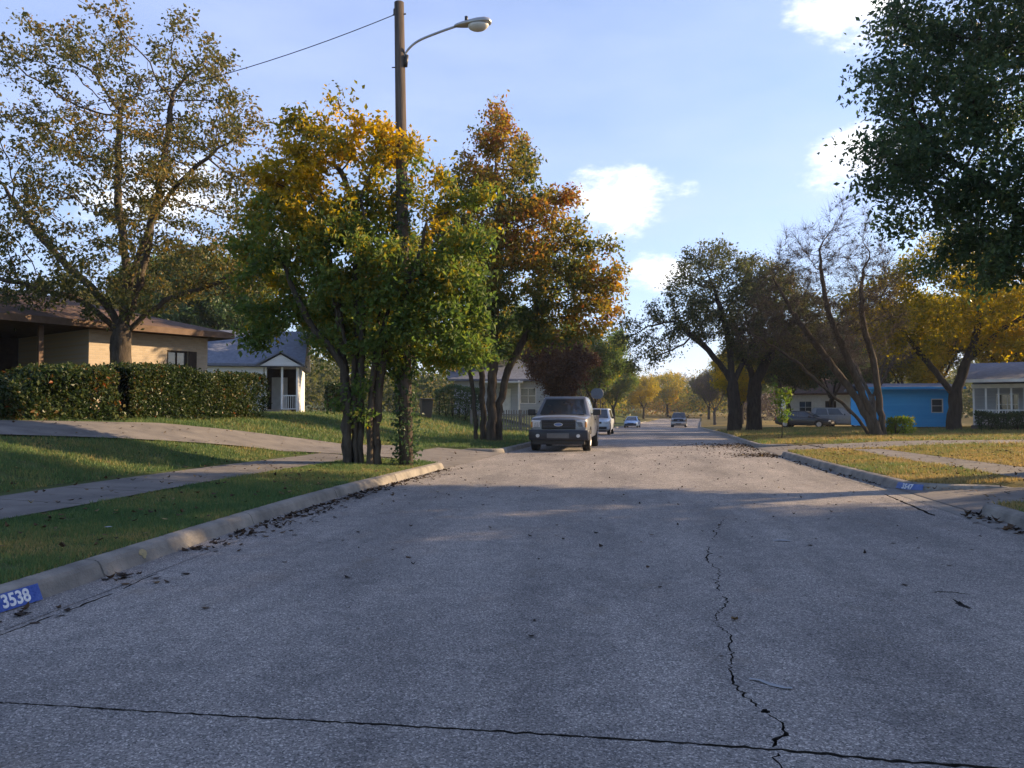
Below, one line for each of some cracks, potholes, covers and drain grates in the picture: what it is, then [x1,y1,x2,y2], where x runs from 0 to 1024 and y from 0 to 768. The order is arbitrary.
crack [705,517,789,768]
crack [1,573,157,635]
